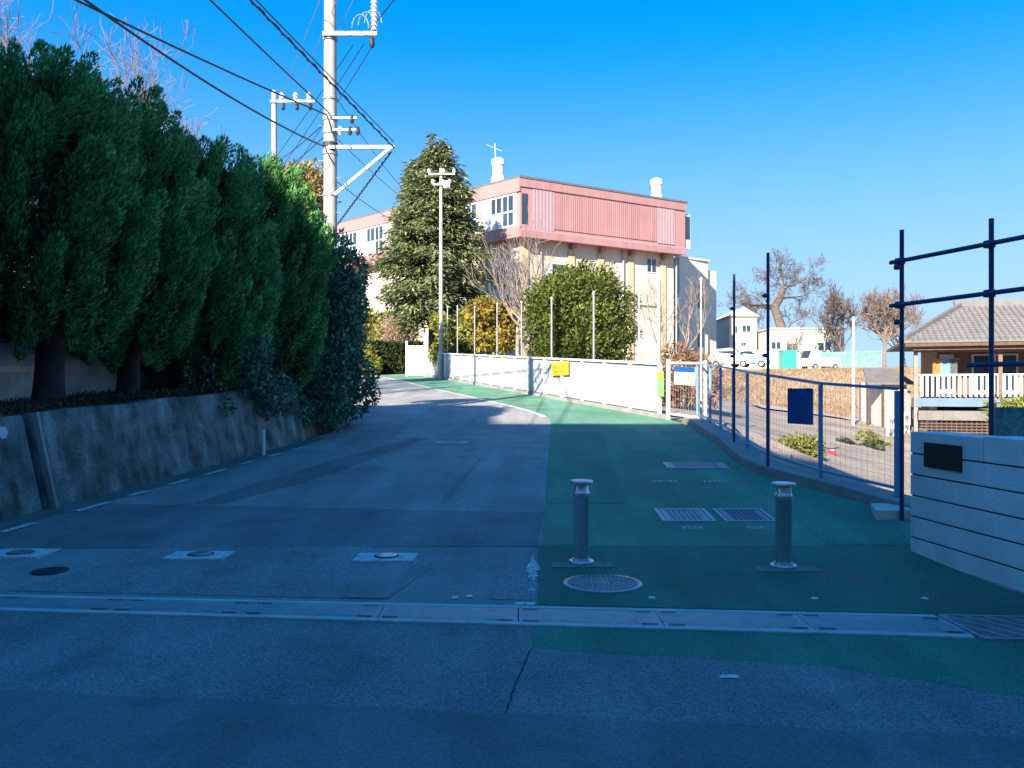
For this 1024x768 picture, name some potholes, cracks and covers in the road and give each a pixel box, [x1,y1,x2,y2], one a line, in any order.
manhole cover [563,575,643,593]
crack [506,649,532,712]
